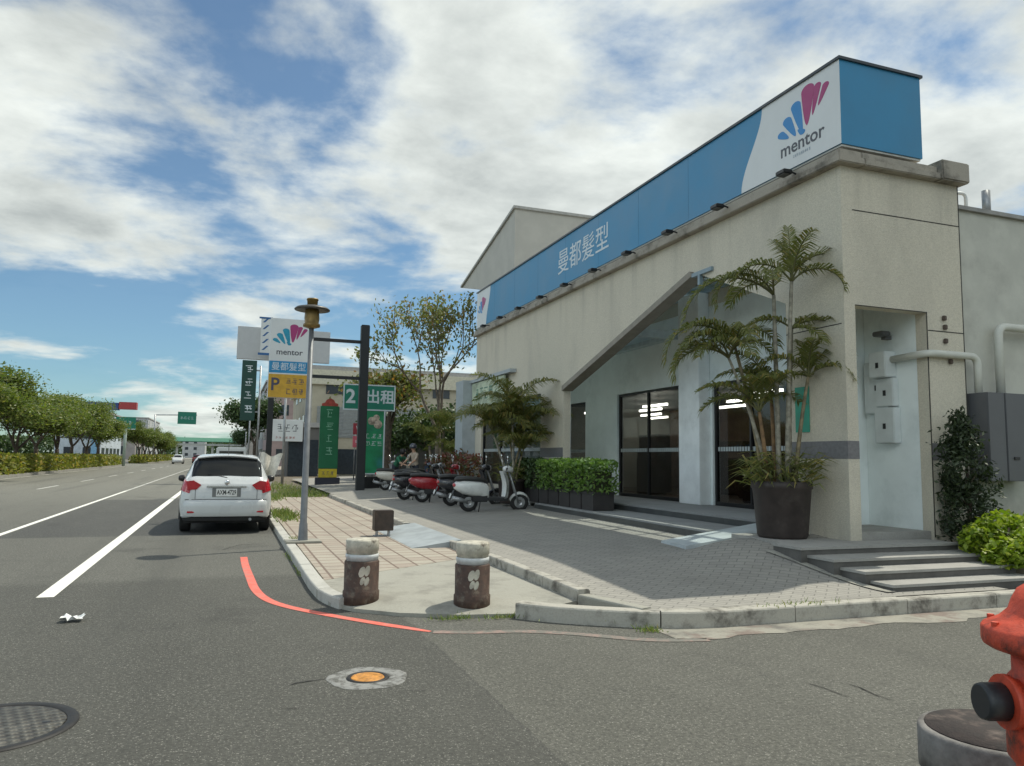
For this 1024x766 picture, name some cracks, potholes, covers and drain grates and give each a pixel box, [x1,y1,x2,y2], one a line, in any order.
manhole cover [0,702,80,752]
manhole cover [326,667,407,690]
